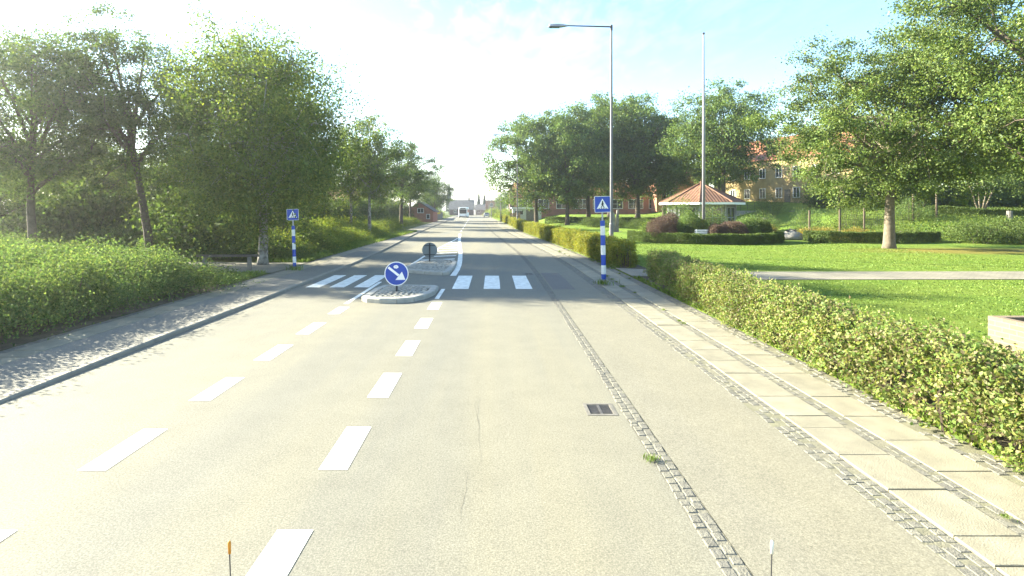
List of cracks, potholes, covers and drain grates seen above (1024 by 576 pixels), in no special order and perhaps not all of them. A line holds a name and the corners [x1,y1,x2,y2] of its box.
drain grate [582,403,619,416]
